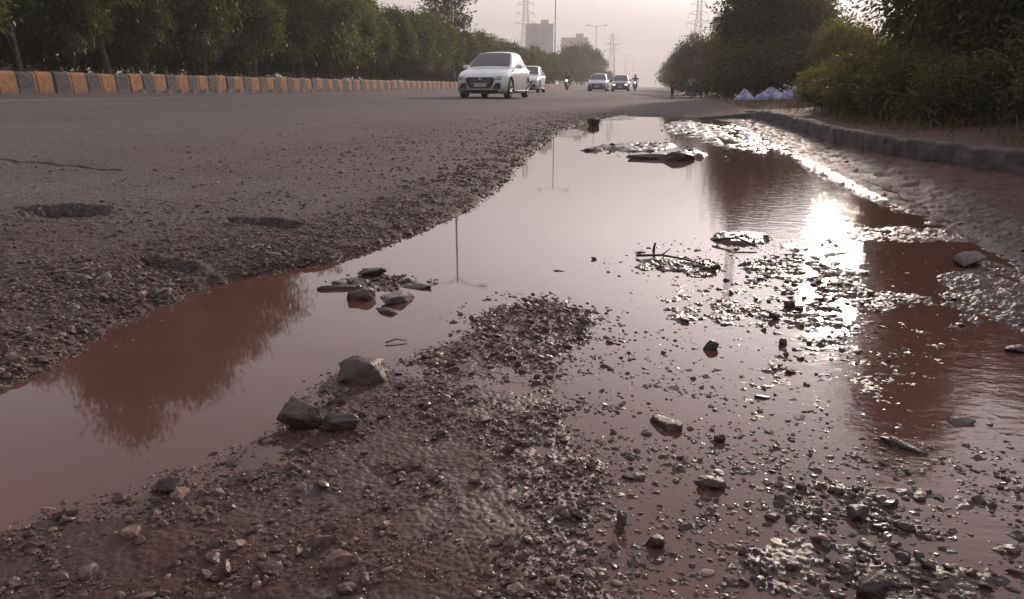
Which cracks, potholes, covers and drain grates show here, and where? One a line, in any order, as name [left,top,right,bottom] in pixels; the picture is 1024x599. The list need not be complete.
pothole [9,203,115,219]
pothole [225,216,312,230]
pothole [140,256,200,275]
crack [0,158,123,171]
